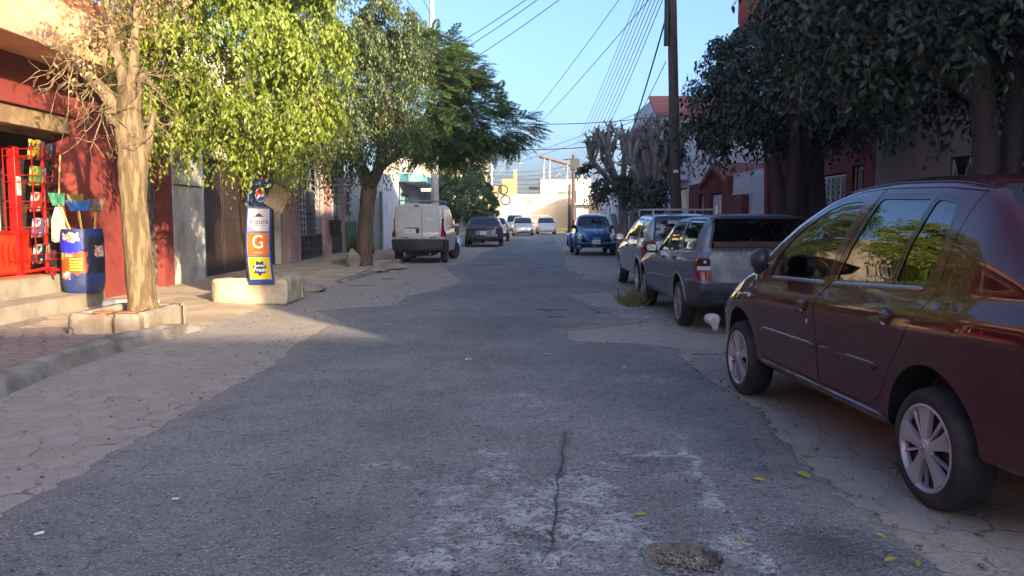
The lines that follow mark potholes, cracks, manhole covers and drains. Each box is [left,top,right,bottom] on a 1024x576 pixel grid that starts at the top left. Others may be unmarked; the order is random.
pothole [640,541,731,576]
crack [540,432,567,564]
